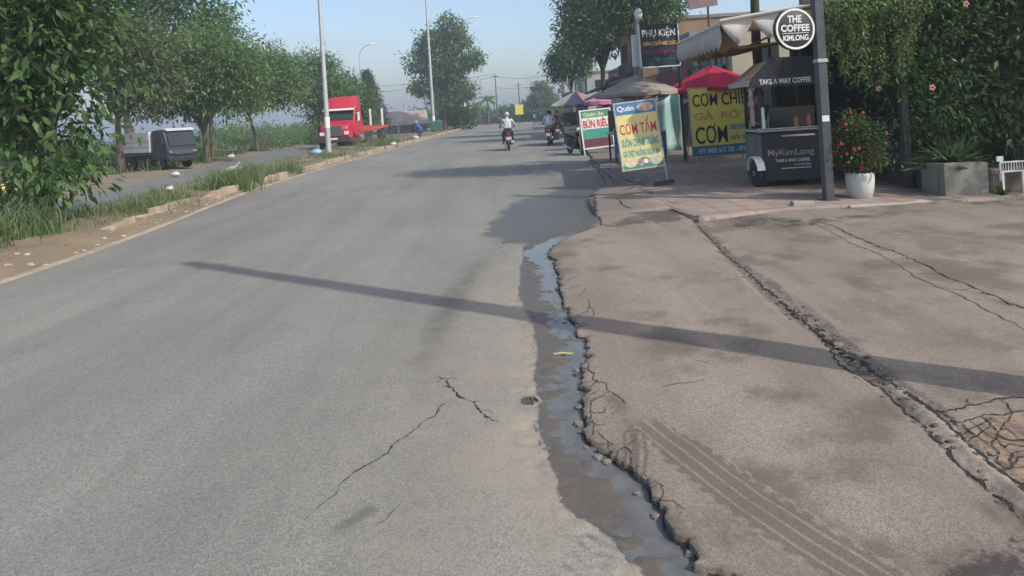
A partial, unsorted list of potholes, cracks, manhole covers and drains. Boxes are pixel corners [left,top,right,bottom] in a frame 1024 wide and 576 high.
crack [962,398,1024,481]
crack [546,256,721,576]
pothole [515,395,543,409]
crack [304,377,499,522]
